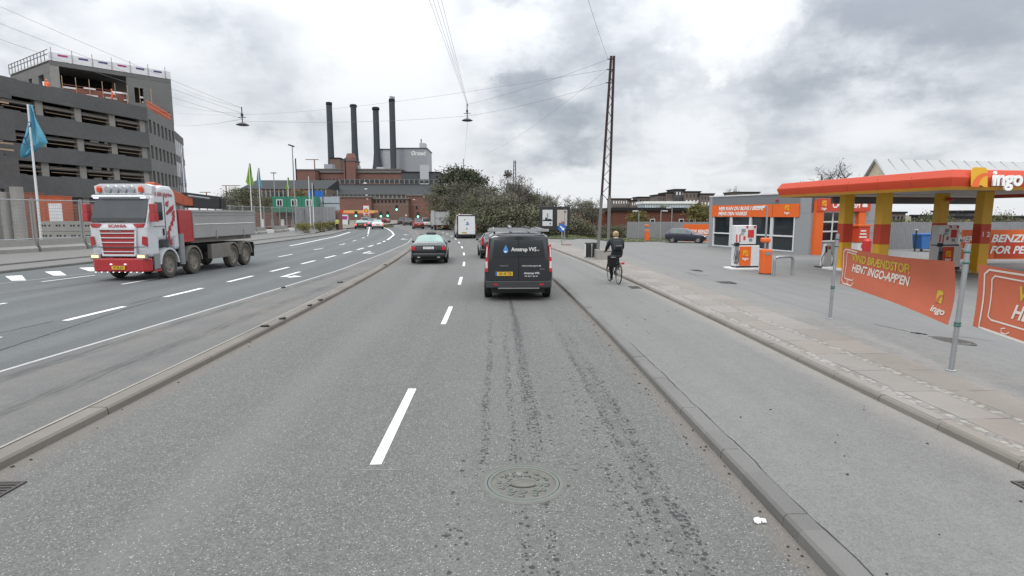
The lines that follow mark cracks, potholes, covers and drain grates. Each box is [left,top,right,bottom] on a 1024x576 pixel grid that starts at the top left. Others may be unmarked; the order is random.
drain grate [0,481,27,497]
manhole cover [927,336,977,346]
manhole cover [480,463,567,505]
